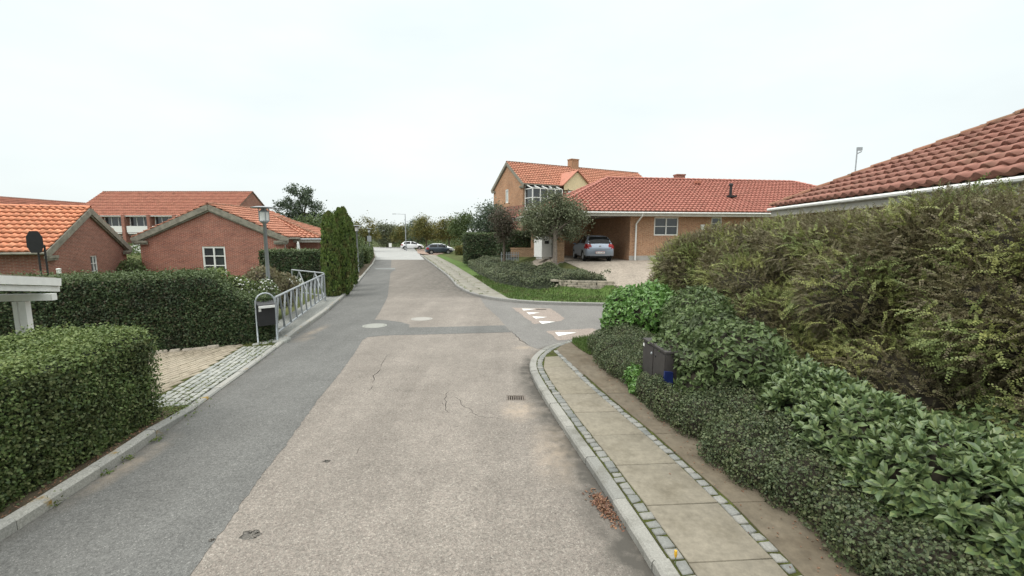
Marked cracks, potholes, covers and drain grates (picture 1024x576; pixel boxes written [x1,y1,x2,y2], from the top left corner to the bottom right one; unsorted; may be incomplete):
pothole [239,529,262,540]
